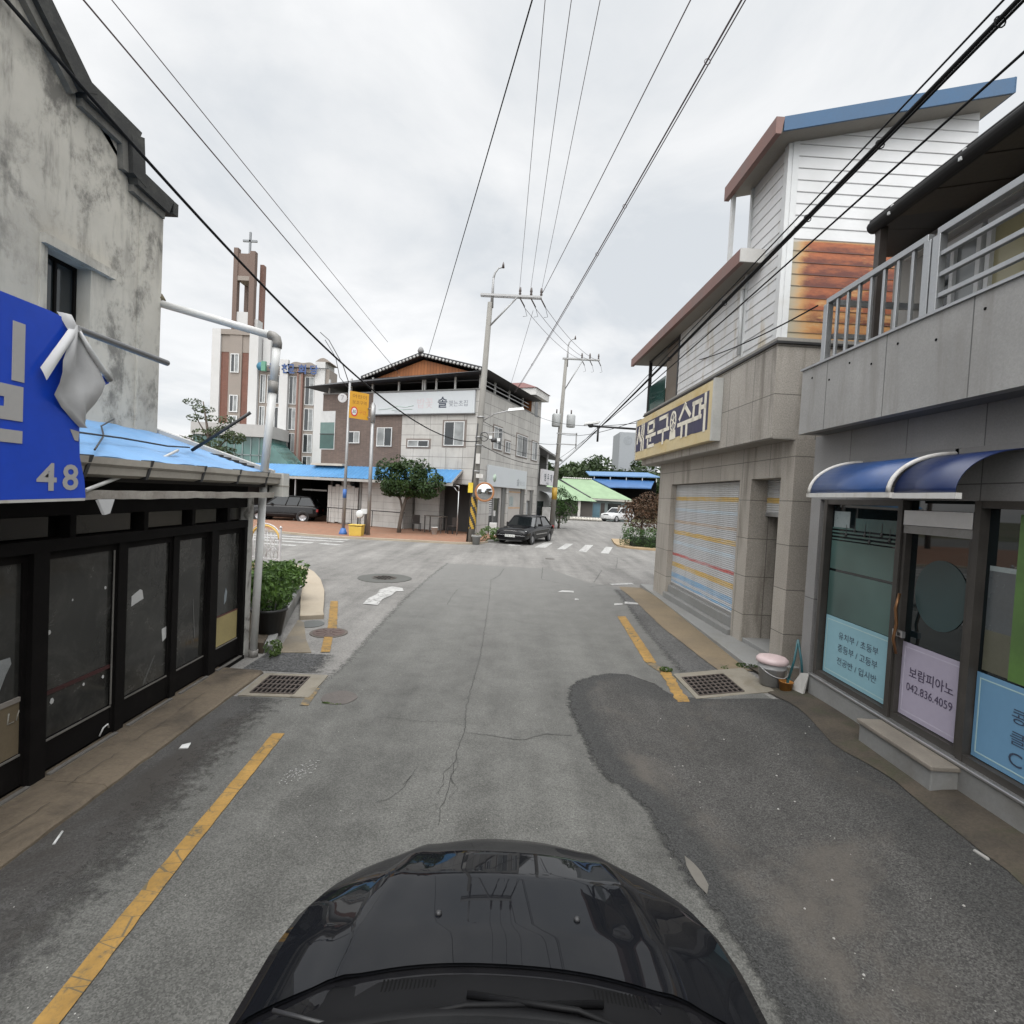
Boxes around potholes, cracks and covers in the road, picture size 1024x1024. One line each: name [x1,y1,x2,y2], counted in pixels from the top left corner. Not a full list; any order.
drain grate [238,673,328,698]
manhole cover [357,574,412,583]
crack [389,585,560,826]
drain grate [673,668,774,699]
manhole cover [309,628,348,638]
